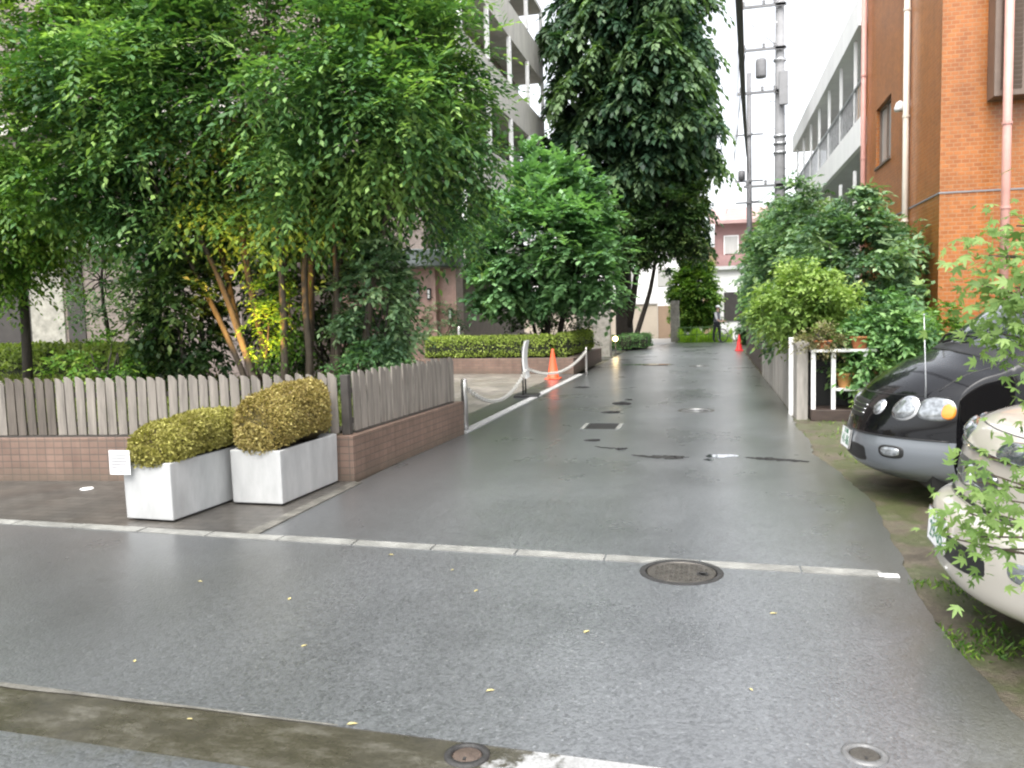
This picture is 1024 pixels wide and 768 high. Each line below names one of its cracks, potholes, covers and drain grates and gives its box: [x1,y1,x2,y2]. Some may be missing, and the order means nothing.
manhole cover [841,742,889,767]
manhole cover [578,422,625,430]
manhole cover [444,742,490,768]
manhole cover [639,560,724,586]
